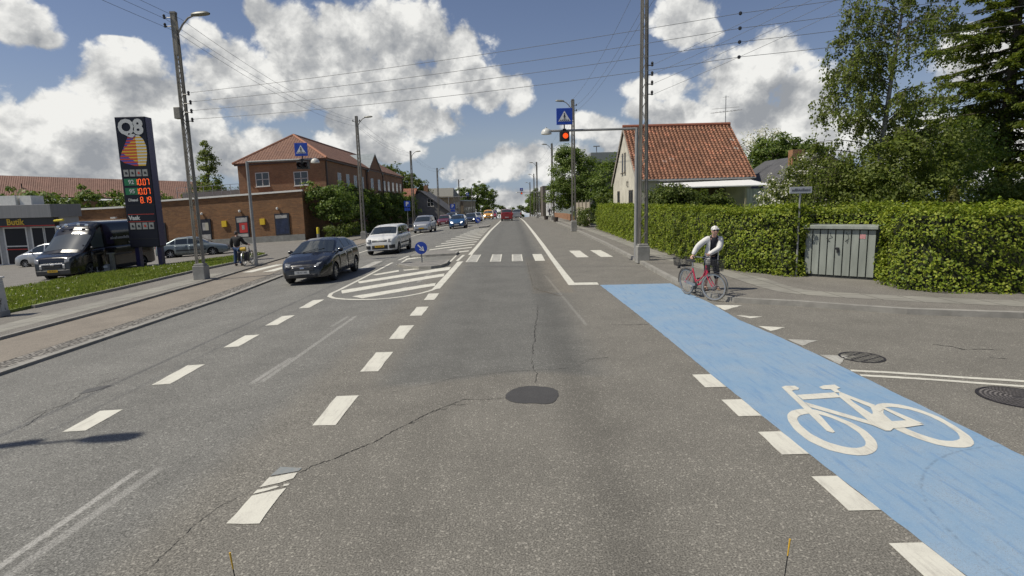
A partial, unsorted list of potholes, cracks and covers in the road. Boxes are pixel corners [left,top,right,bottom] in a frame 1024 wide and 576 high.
manhole cover [975,386,1024,408]
manhole cover [838,351,886,363]
crack [303,398,499,471]
